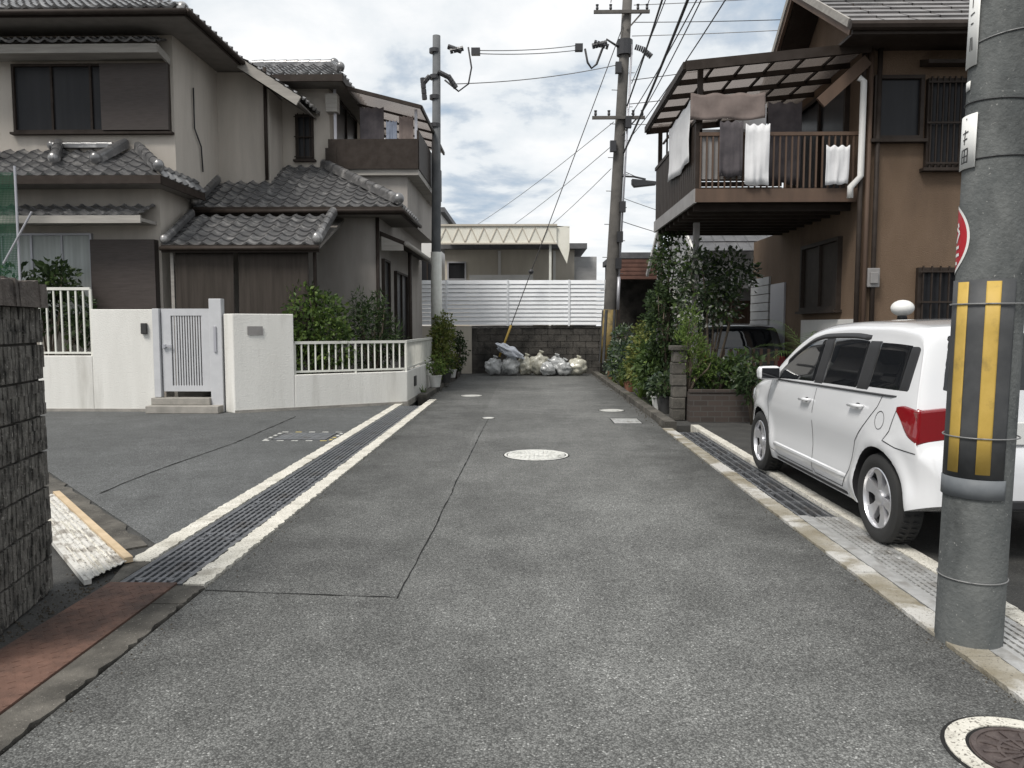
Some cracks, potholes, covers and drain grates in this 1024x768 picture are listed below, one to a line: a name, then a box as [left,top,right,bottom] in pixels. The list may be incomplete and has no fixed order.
drain grate [765,492,836,518]
drain grate [679,432,716,443]
drain grate [334,436,379,448]
drain grate [120,537,244,585]
drain grate [311,448,363,463]
drain grate [245,480,320,505]
drain grate [353,426,391,437]
manhole cover [503,449,569,461]
manhole cover [262,433,343,441]
drain grate [192,504,288,538]
drain grate [283,462,345,481]
drain grate [368,418,403,427]
